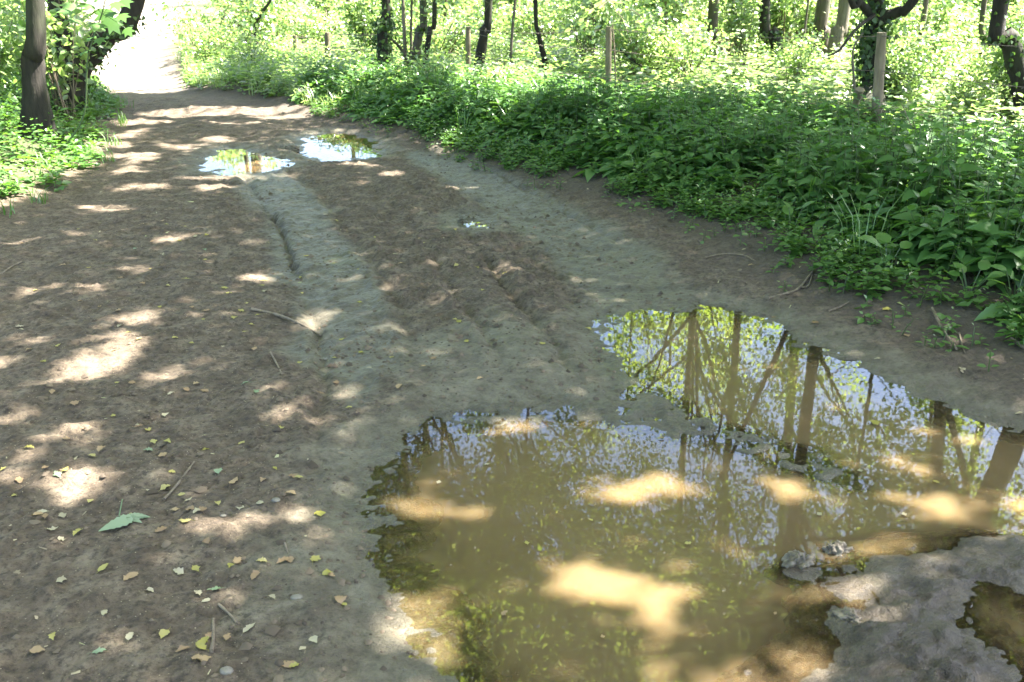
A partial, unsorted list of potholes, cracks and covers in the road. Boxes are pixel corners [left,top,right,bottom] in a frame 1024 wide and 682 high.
pothole [197,147,295,176]
pothole [354,301,1024,682]
pothole [295,132,385,161]
pothole [462,215,493,228]
